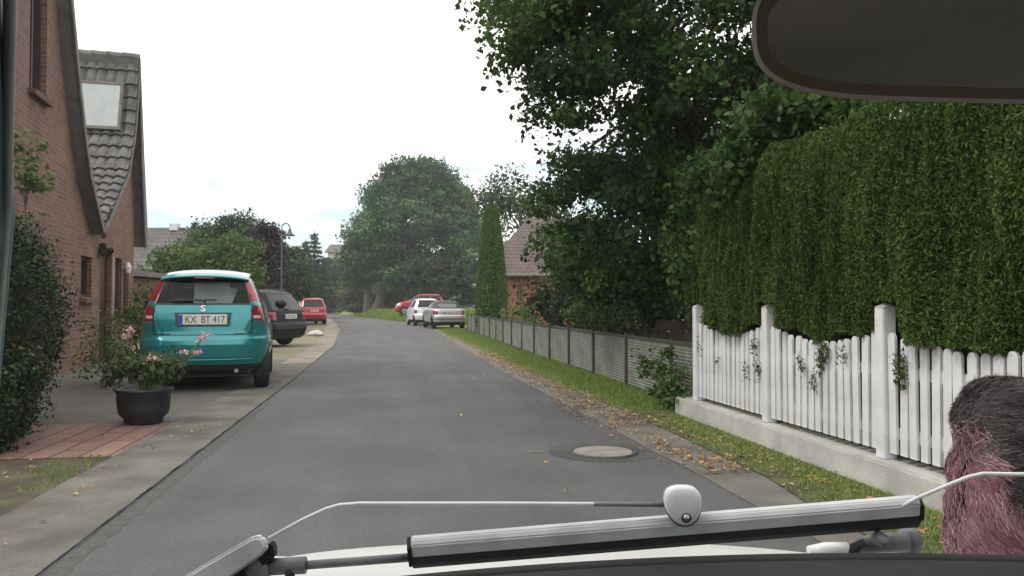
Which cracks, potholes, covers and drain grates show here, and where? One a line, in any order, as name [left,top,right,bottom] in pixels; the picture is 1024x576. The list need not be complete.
manhole cover [568,445,638,459]
